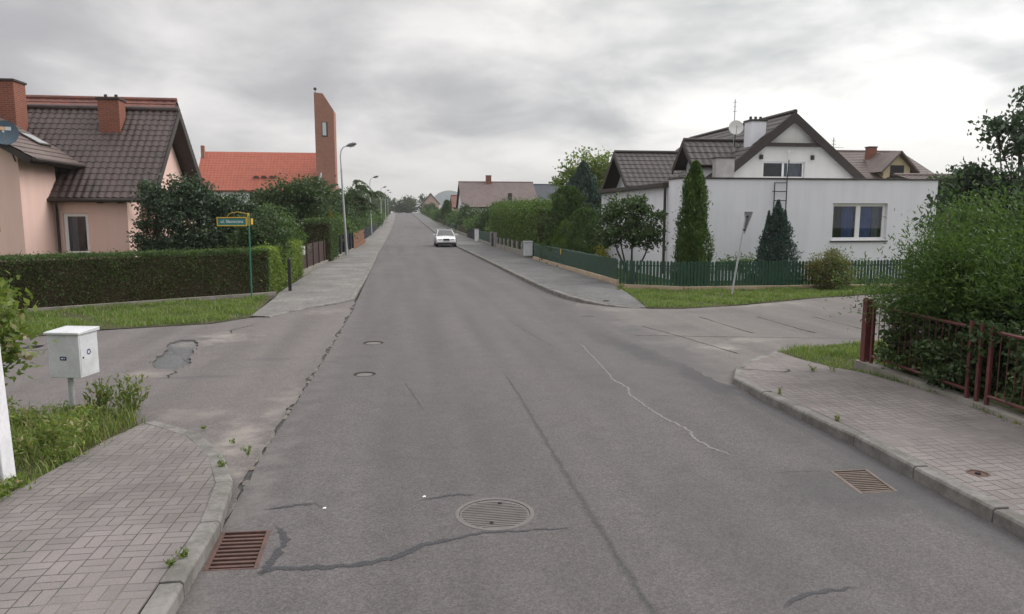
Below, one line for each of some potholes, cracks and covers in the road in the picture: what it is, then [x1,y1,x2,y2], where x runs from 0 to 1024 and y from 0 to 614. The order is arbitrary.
crack [582,345,730,455]
pothole [148,340,199,370]
manhole cover [455,498,534,530]
utility cover [966,469,991,477]
drain grate [830,469,898,494]
drain grate [203,530,271,571]
